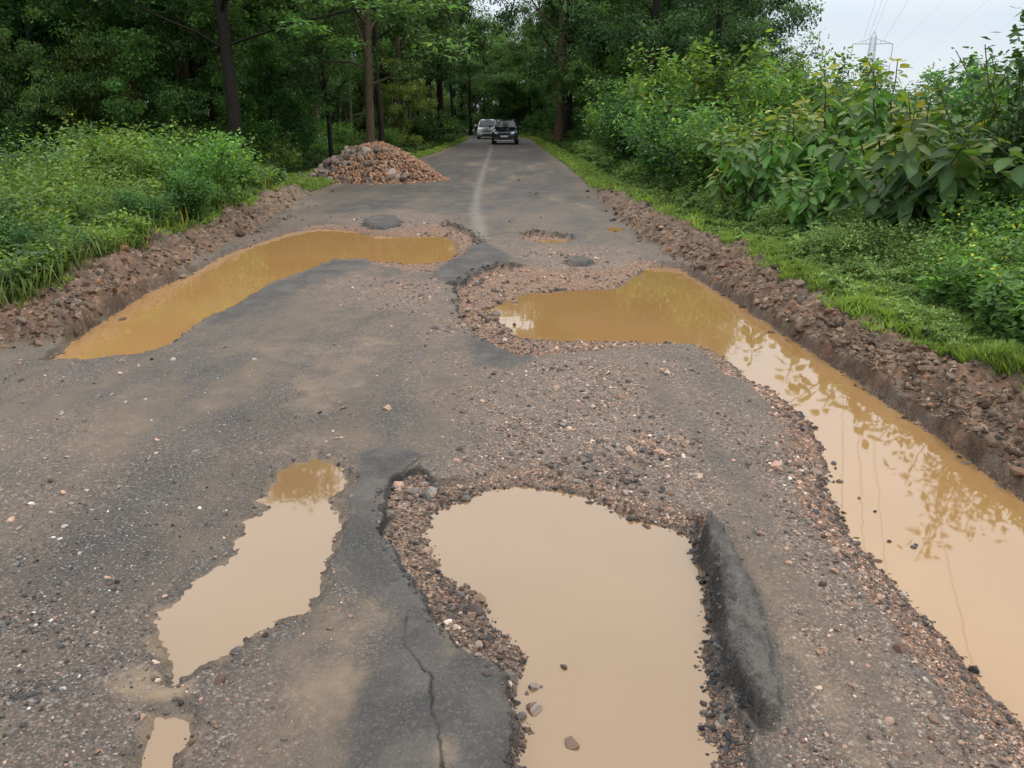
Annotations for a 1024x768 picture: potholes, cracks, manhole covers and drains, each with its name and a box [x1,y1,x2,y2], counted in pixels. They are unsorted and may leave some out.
pothole [40,221,486,361]
pothole [119,690,209,768]
pothole [519,230,578,244]
pothole [447,259,1024,768]
pothole [135,448,363,688]
crack [403,615,447,768]
pothole [378,459,761,768]
